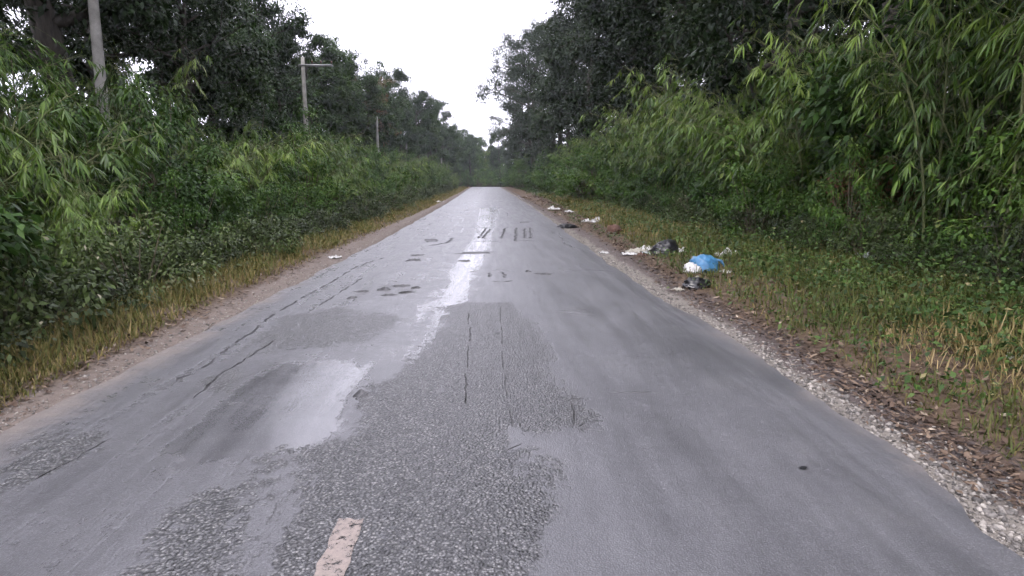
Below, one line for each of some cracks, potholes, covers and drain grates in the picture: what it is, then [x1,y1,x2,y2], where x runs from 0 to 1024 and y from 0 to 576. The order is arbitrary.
crack [475,212,534,242]
crack [174,258,382,398]
